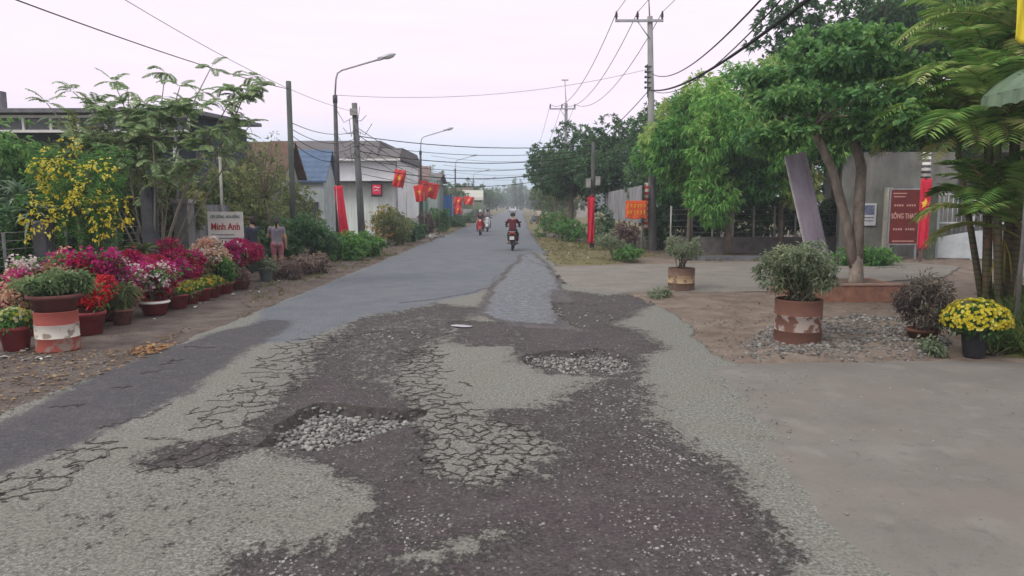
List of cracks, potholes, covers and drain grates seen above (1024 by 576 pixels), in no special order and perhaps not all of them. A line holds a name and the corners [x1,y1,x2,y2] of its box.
crack [0,334,352,503]
pothole [521,348,635,375]
pothole [254,402,427,452]
crack [394,346,558,484]
